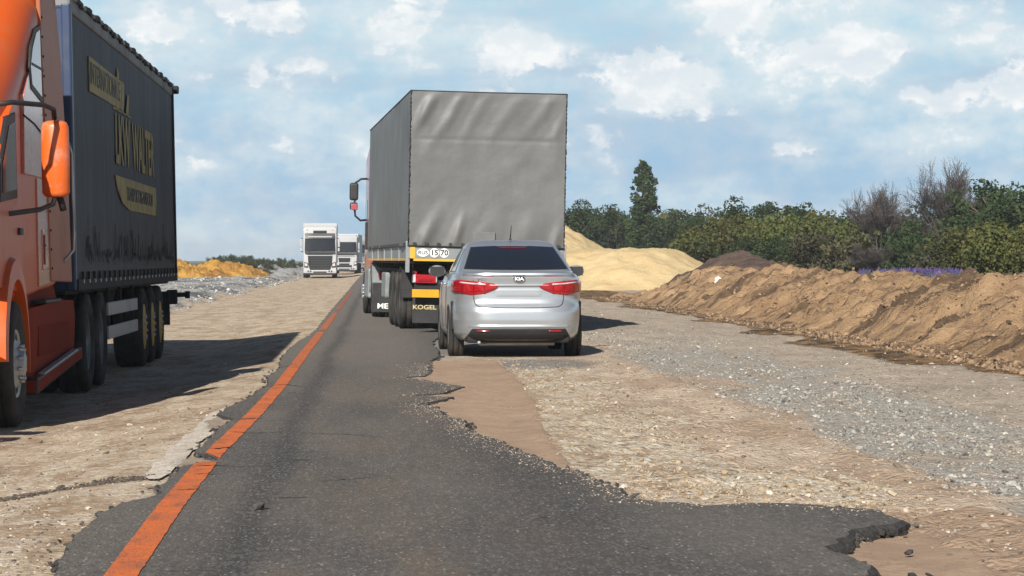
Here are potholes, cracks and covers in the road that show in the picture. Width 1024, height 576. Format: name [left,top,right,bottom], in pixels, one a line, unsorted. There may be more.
pothole [414,360,571,469]
crack [0,474,156,502]
